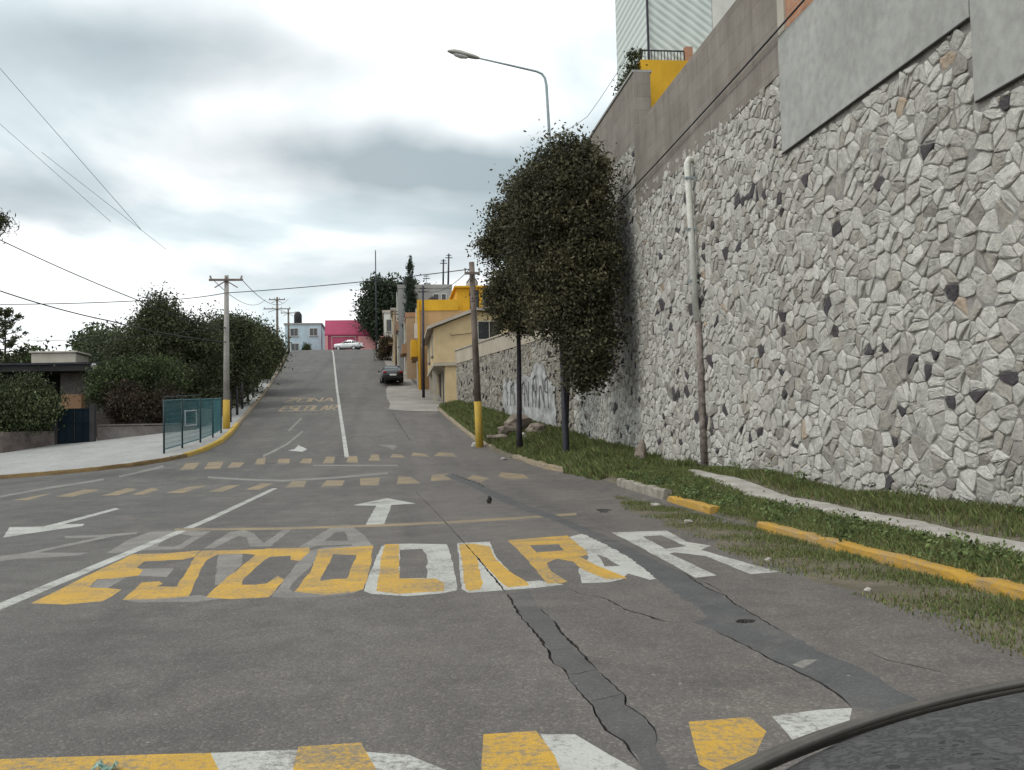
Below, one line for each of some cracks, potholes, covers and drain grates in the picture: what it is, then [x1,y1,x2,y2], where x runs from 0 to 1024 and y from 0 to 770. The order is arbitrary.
crack [416,492,686,763]
